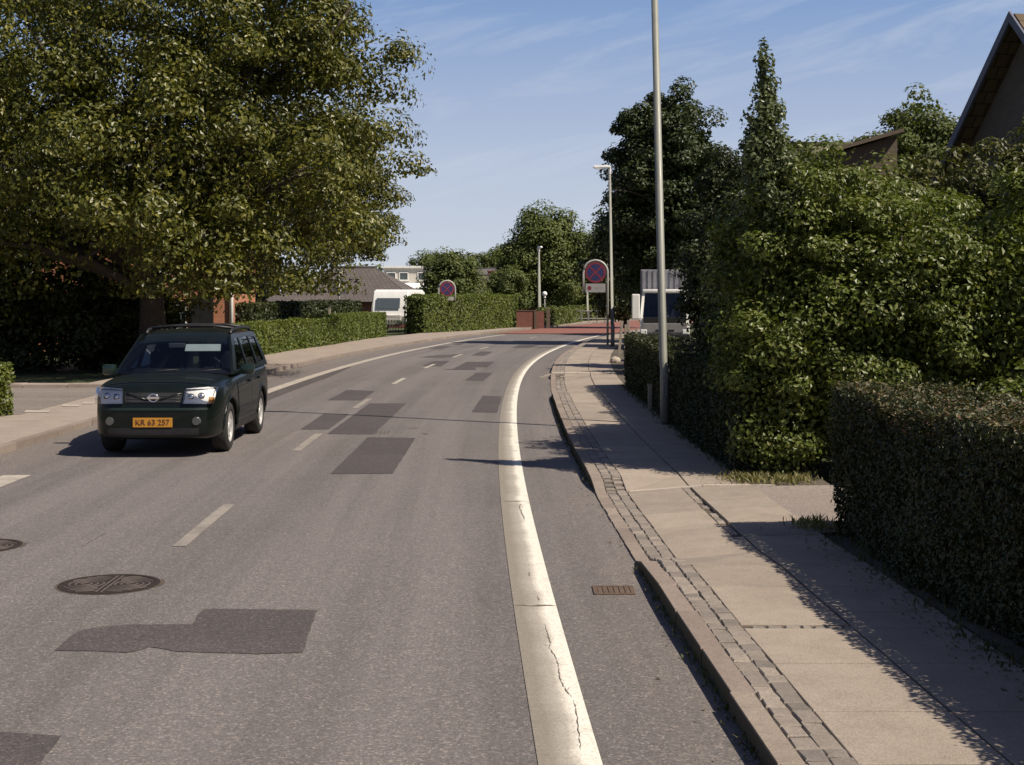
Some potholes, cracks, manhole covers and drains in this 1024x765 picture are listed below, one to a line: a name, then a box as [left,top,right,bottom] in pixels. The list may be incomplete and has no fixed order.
manhole cover [0,538,27,551]
drain grate [592,585,636,595]
manhole cover [55,574,165,595]
crack [545,625,581,748]
